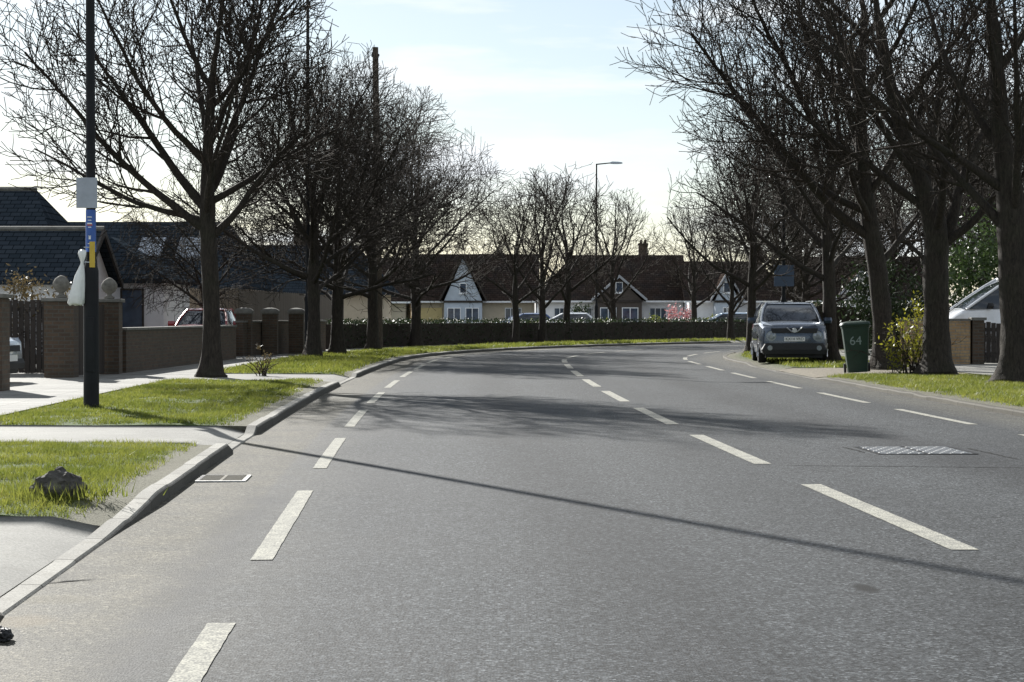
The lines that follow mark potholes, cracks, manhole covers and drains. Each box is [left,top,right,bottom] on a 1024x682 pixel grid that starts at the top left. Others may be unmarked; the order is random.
drain grate [195,475,252,483]
manhole cover [855,446,978,455]
